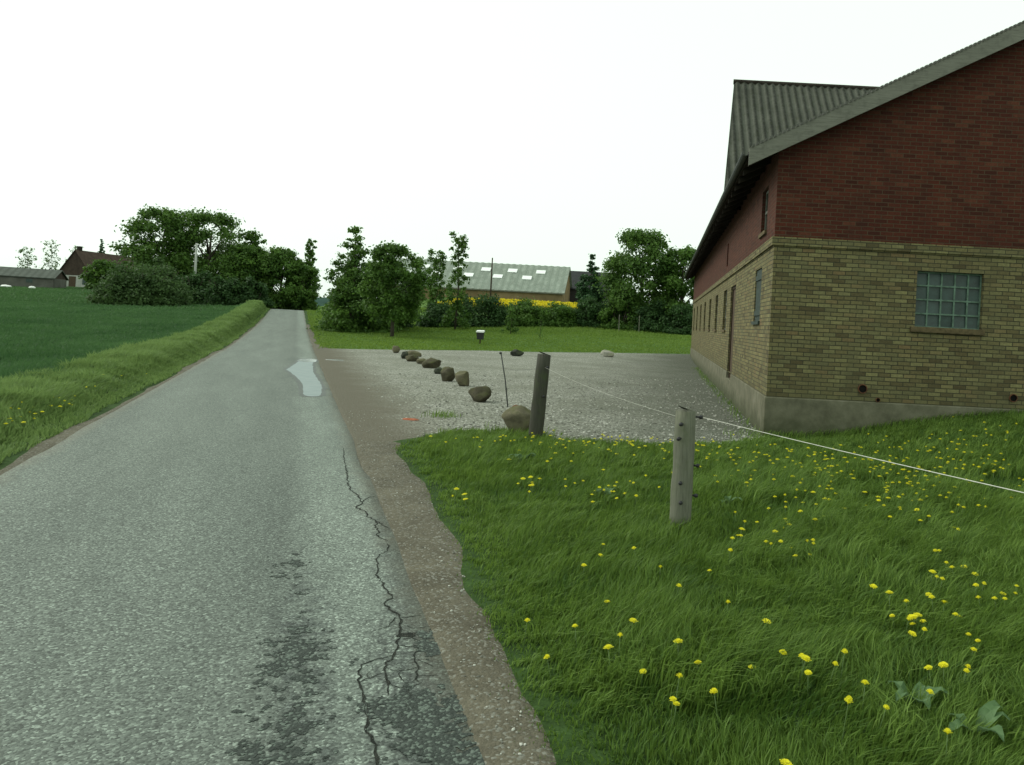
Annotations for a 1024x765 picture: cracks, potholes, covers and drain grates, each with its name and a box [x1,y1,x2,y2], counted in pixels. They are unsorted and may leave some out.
crack [337,448,434,765]
